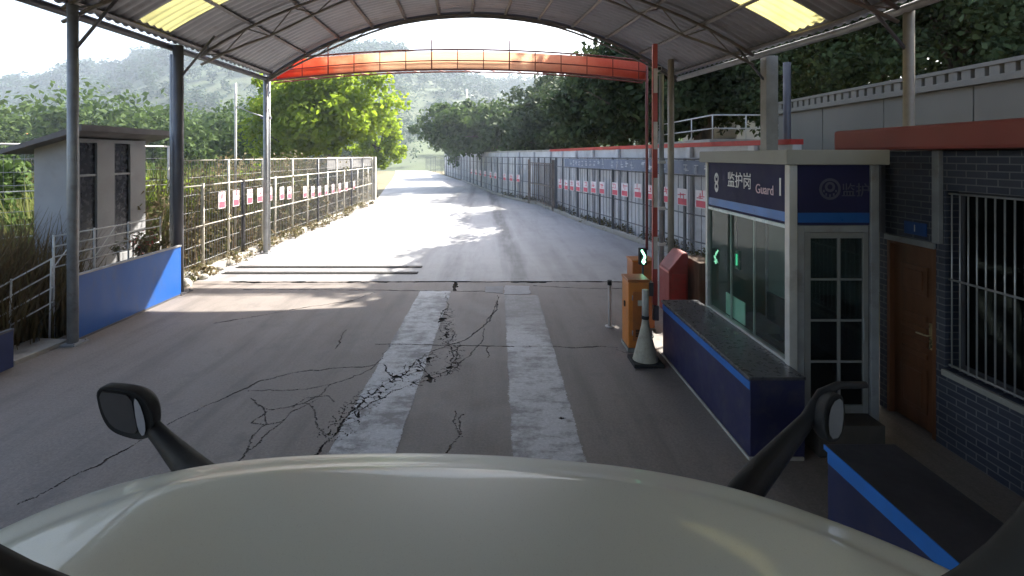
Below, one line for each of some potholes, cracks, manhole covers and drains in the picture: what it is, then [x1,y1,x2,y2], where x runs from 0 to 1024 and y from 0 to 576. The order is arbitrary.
crack [17,293,629,505]
